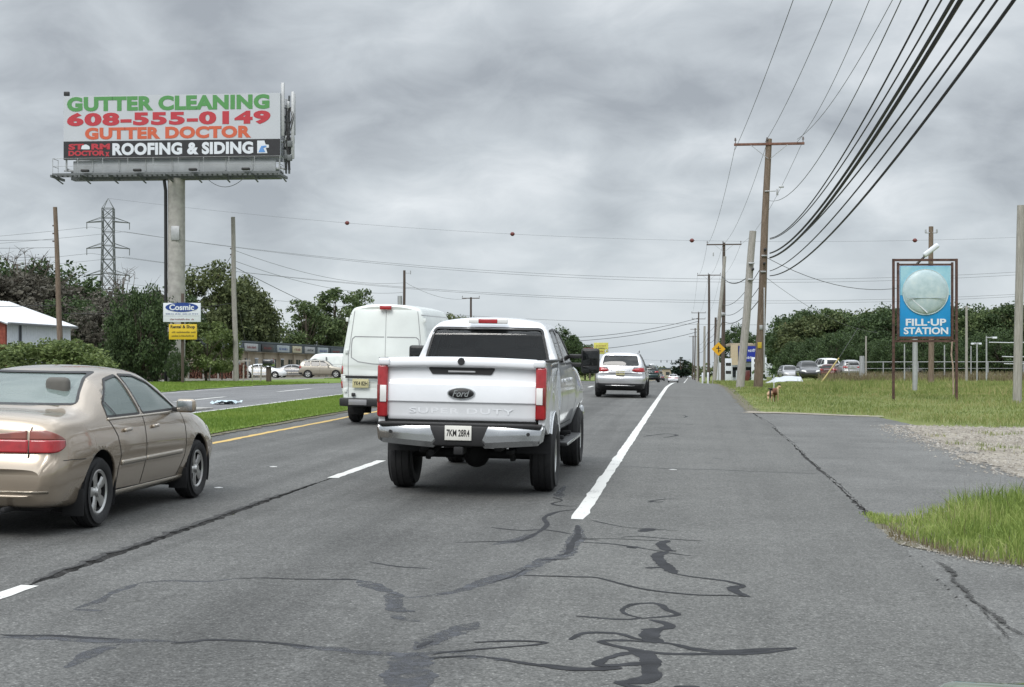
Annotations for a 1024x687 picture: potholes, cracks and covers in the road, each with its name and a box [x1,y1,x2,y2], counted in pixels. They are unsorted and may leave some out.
crack [938,561,1024,638]
